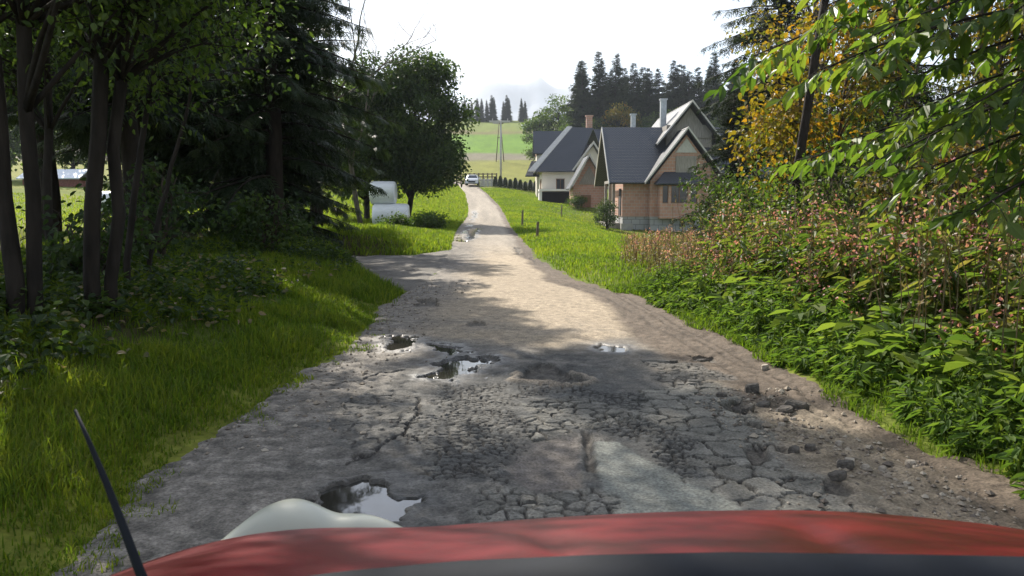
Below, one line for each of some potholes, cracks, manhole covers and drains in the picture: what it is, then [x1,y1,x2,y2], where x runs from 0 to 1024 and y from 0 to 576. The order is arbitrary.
crack [309,360,863,523]
pothole [519,362,584,384]
pothole [418,354,500,381]
pothole [304,475,424,520]
